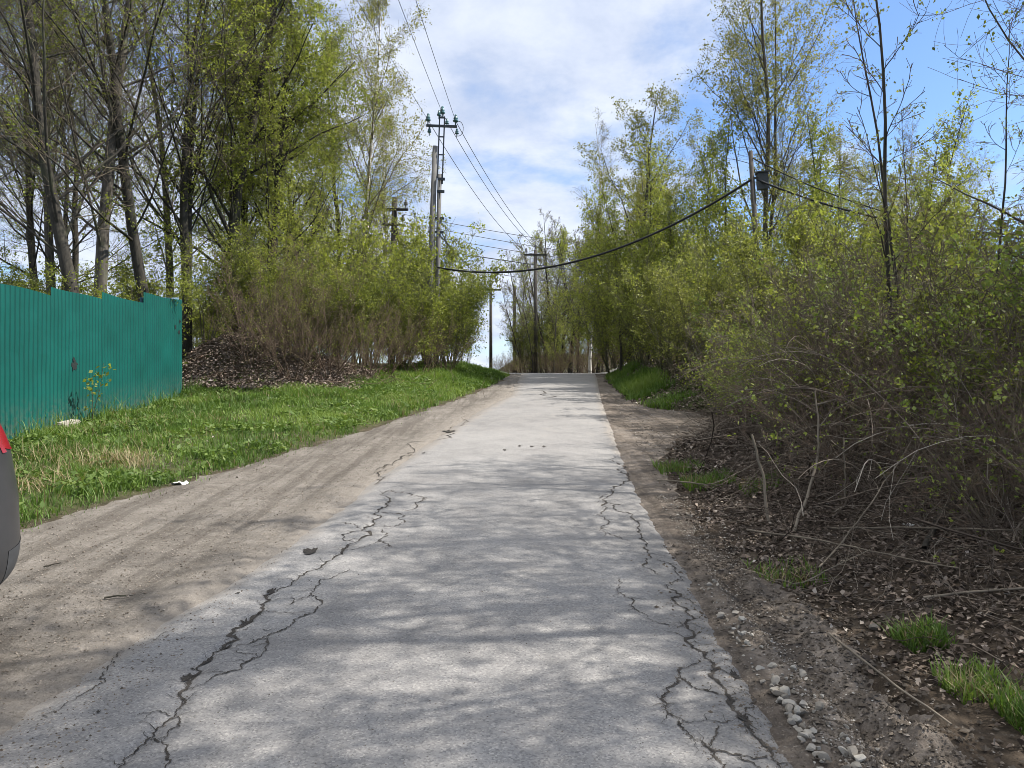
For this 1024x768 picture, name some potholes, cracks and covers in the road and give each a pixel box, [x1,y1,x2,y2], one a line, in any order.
crack [102,419,467,768]
crack [597,458,794,768]
